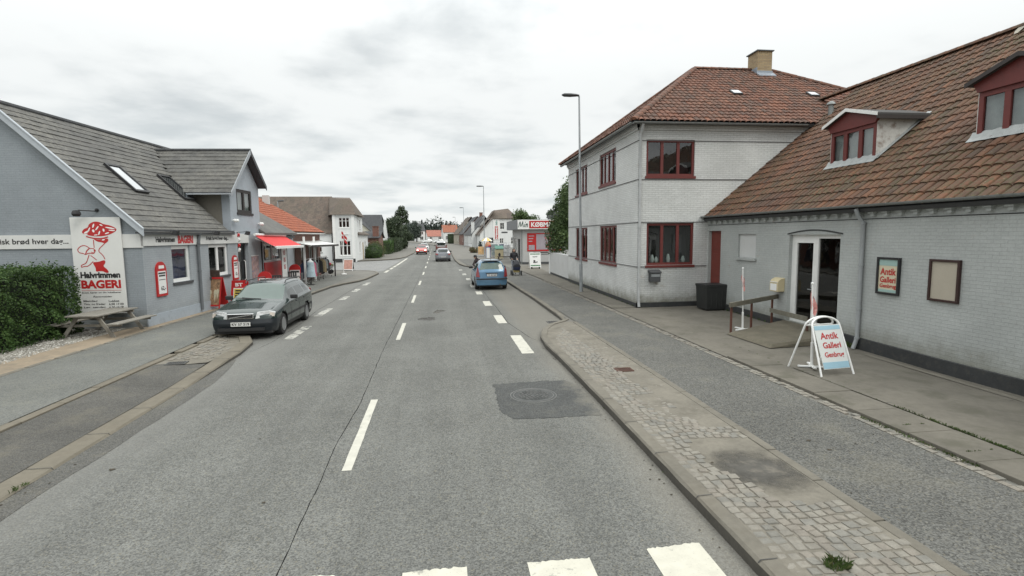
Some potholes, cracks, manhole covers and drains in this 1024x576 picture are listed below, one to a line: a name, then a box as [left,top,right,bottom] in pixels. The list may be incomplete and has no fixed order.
manhole cover [510,388,557,403]
